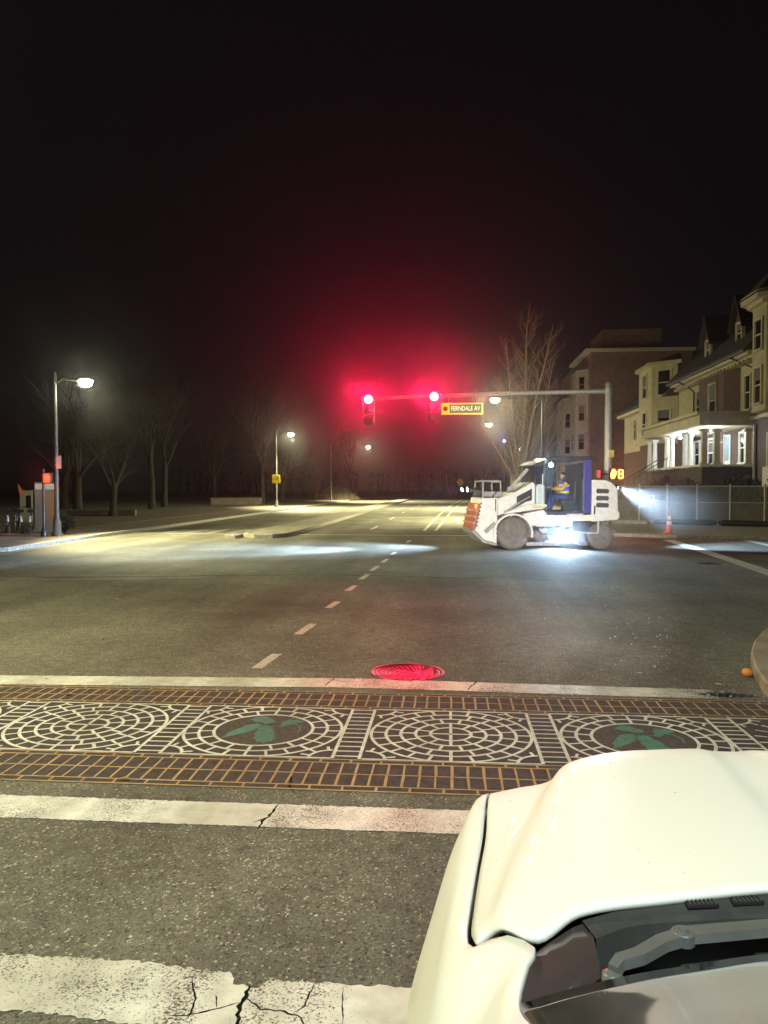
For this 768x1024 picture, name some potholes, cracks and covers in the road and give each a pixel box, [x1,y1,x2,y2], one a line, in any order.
crack [168,979,344,1024]
manhole cover [370,663,445,681]
crack [255,771,295,829]
